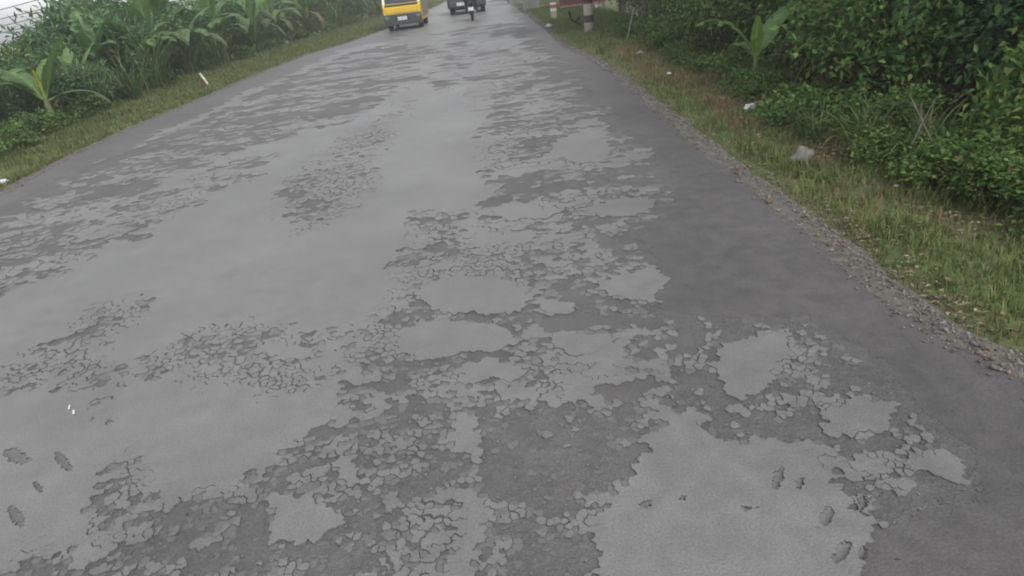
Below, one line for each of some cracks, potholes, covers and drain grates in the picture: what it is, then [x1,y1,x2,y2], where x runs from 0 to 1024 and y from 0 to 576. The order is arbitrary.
pothole [831,540,853,564]
crack [446,375,681,576]
pothole [3,448,31,465]
crack [328,207,666,404]
crack [116,314,357,404]
crack [0,290,162,433]
pothole [7,505,25,527]
crack [0,366,484,576]
pothole [771,467,785,490]
pothole [819,506,835,526]
crack [460,23,680,243]
crack [0,38,449,297]
